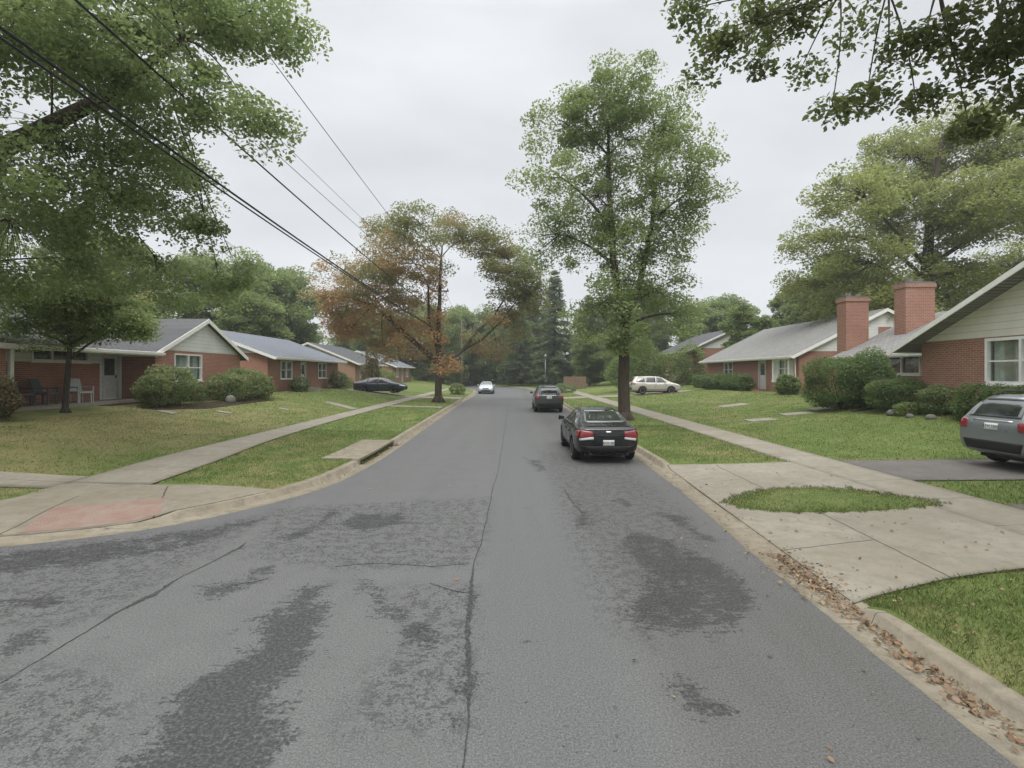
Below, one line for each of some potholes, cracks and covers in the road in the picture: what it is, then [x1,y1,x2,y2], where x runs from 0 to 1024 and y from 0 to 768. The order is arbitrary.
crack [0,541,247,683]
